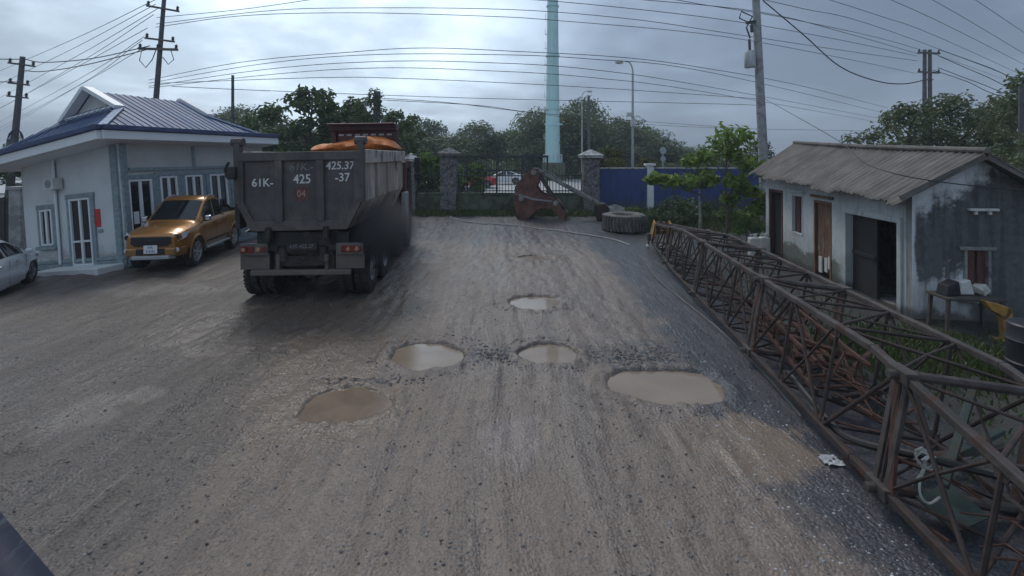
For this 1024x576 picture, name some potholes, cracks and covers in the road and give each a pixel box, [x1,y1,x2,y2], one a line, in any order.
pothole [277,378,417,432]
pothole [506,338,593,369]
pothole [498,292,574,314]
pothole [581,362,755,414]
pothole [509,254,563,262]
pothole [373,336,482,378]
